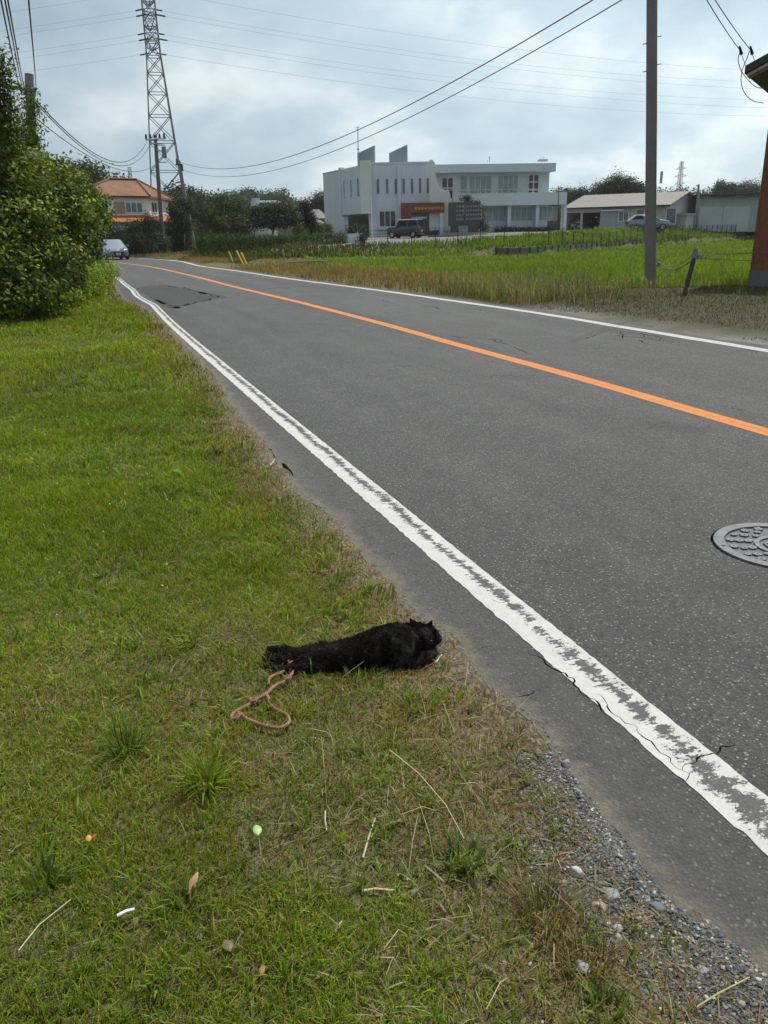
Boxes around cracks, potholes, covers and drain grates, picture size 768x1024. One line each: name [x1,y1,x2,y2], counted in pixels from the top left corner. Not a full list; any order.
manhole cover [710,523,768,568]
crack [585,330,695,343]
crack [519,650,735,786]
